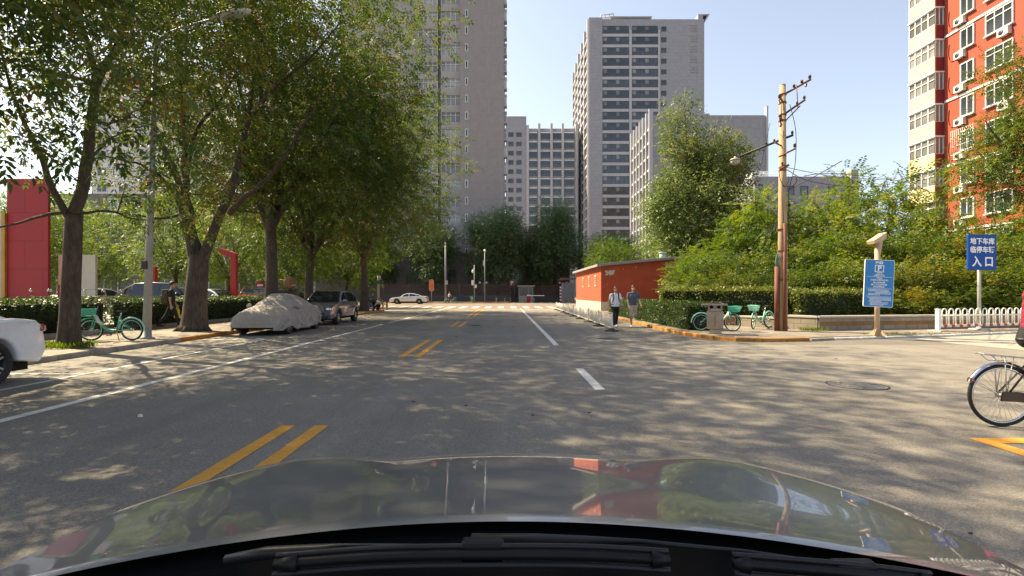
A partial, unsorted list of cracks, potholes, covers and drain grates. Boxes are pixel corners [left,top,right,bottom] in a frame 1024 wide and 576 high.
manhole cover [825,380,891,390]
